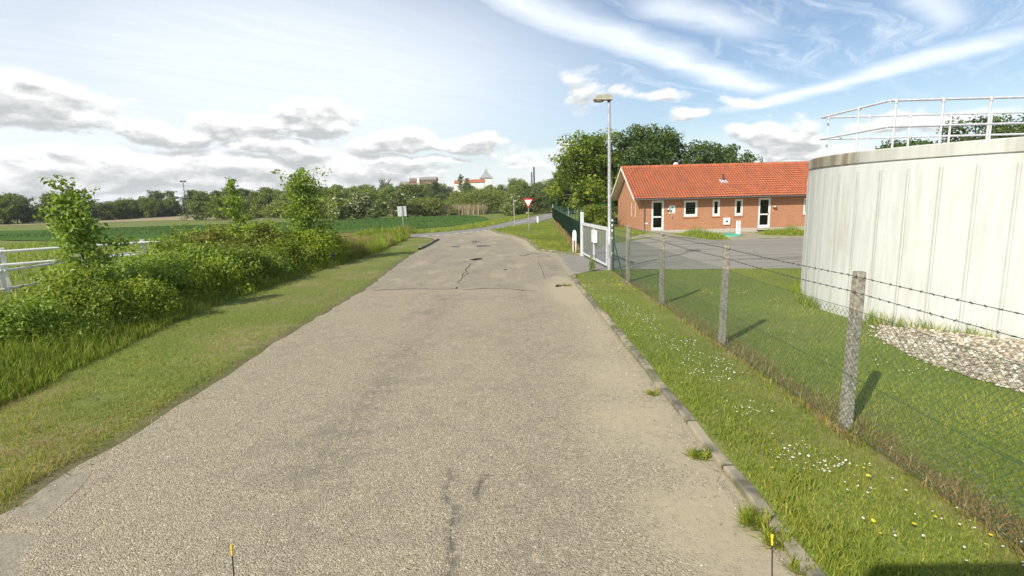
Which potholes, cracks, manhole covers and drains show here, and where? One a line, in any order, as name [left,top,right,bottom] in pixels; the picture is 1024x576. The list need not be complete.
crack [391,253,550,291]
